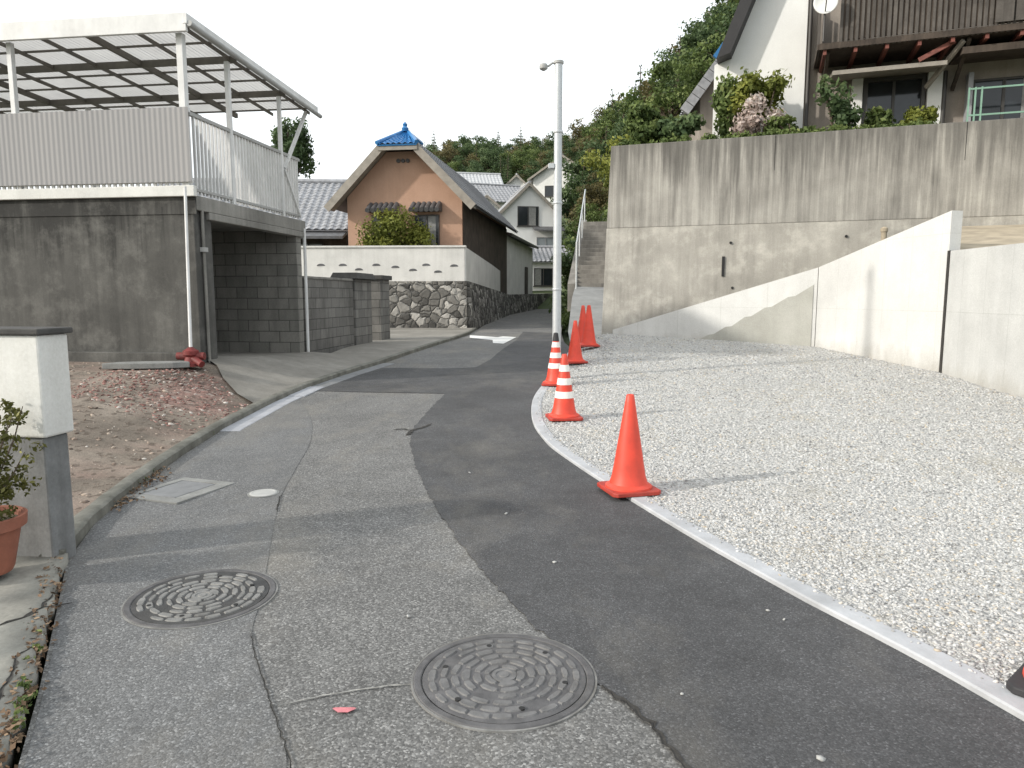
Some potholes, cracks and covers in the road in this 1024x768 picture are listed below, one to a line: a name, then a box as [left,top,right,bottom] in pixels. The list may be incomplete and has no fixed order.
utility cover [247,489,279,498]
manhole cover [411,633,597,733]
crack [0,594,72,625]
crack [277,684,412,707]
manhole cover [120,569,278,630]
crack [0,643,38,699]
